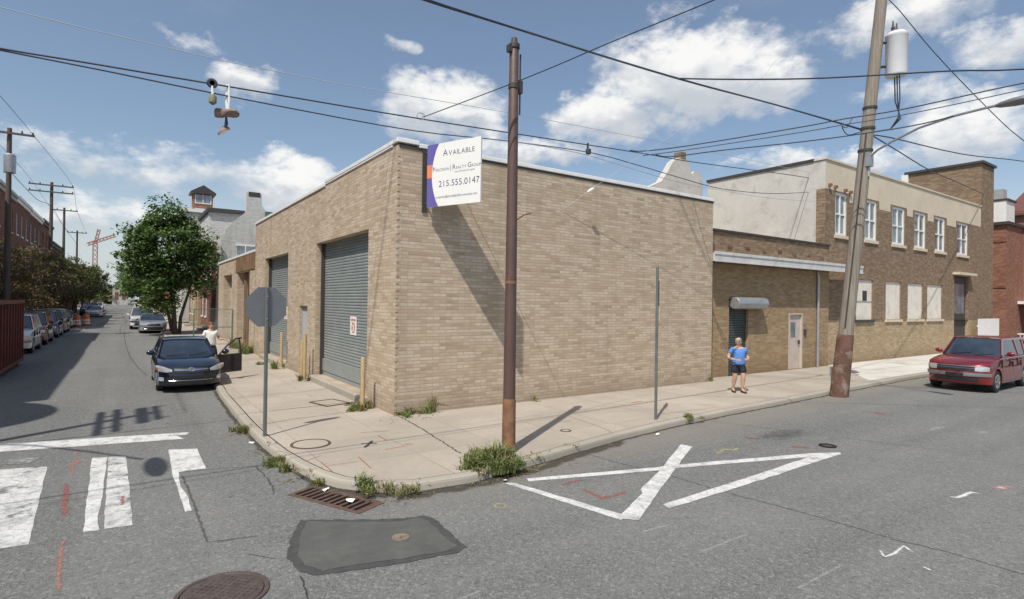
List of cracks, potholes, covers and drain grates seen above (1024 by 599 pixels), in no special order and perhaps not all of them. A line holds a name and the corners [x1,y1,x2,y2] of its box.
drain grate [287,485,384,514]
utility cover [392,533,410,541]
utility cover [309,399,351,407]
manhole cover [290,439,331,449]
manhole cover [173,571,270,599]
